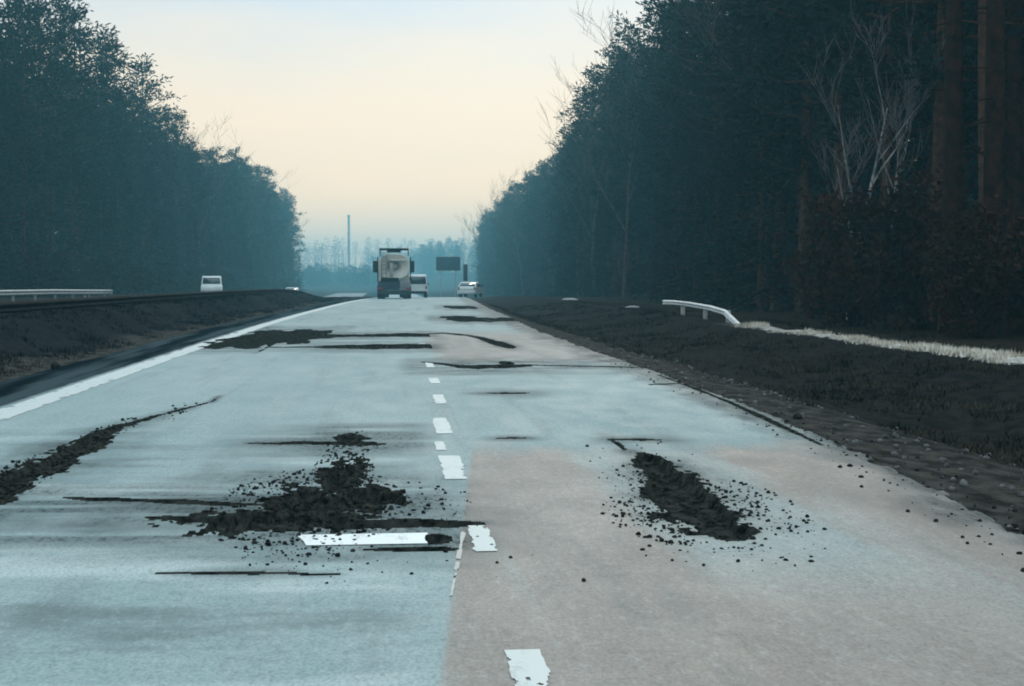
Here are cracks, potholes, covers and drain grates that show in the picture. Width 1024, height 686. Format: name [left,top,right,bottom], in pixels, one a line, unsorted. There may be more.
crack [606,438,661,450]
pothole [630,452,761,541]
pothole [200,329,335,352]
pothole [144,454,410,540]
crack [424,361,823,445]
crack [0,399,266,507]
